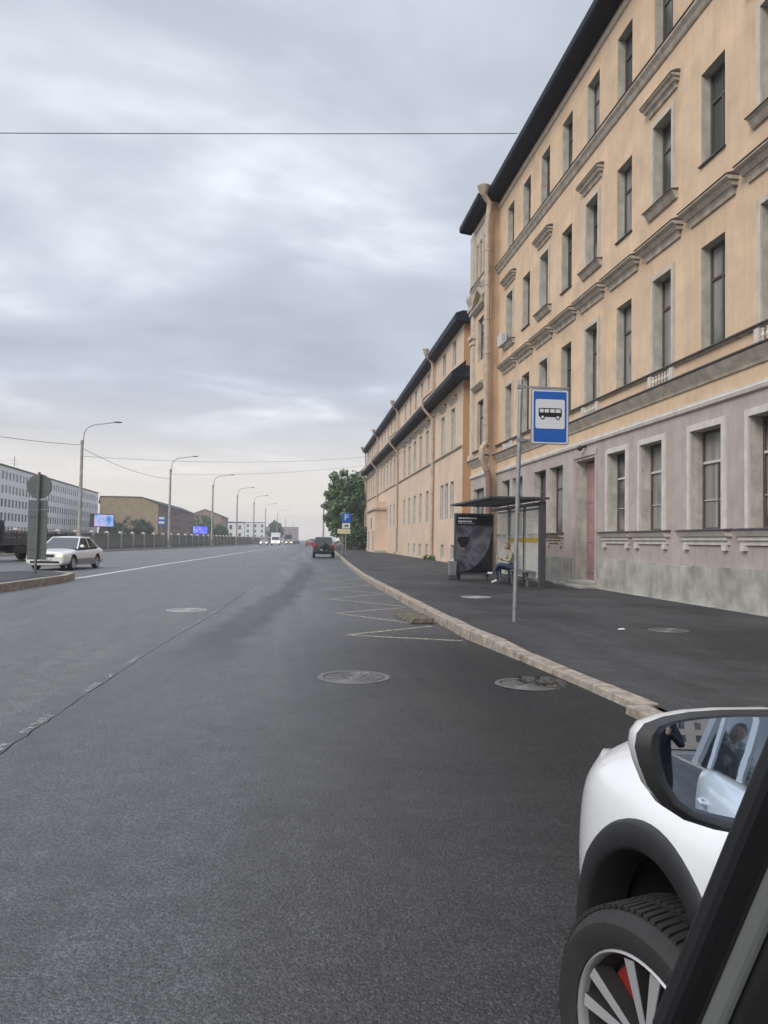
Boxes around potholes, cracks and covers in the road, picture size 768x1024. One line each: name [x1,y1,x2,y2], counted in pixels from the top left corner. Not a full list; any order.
manhole cover [495,678,561,691]
manhole cover [317,670,391,684]
